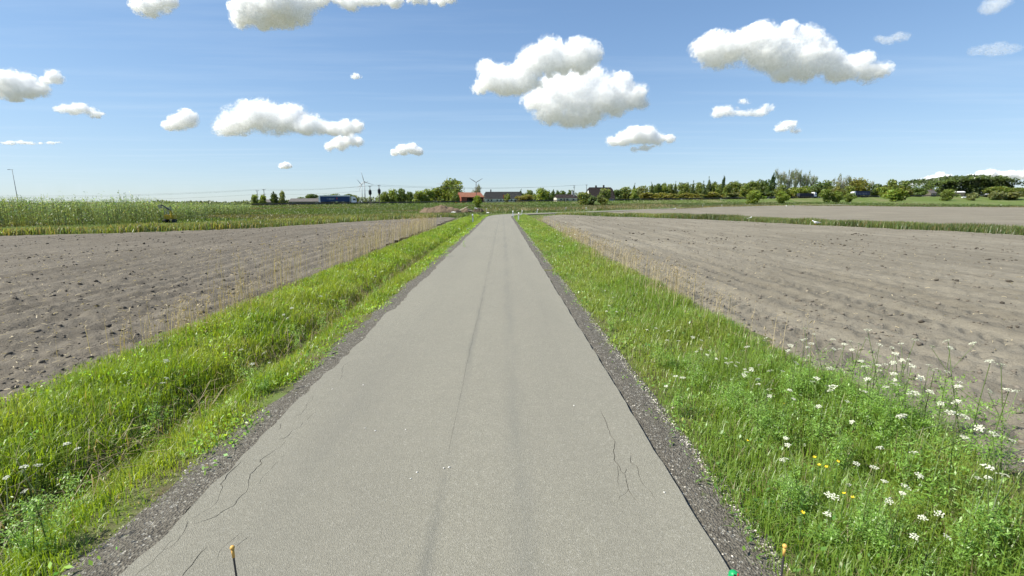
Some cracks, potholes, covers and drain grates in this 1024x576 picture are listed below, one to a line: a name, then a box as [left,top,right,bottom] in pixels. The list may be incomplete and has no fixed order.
crack [137,396,314,575]
crack [601,411,657,501]
